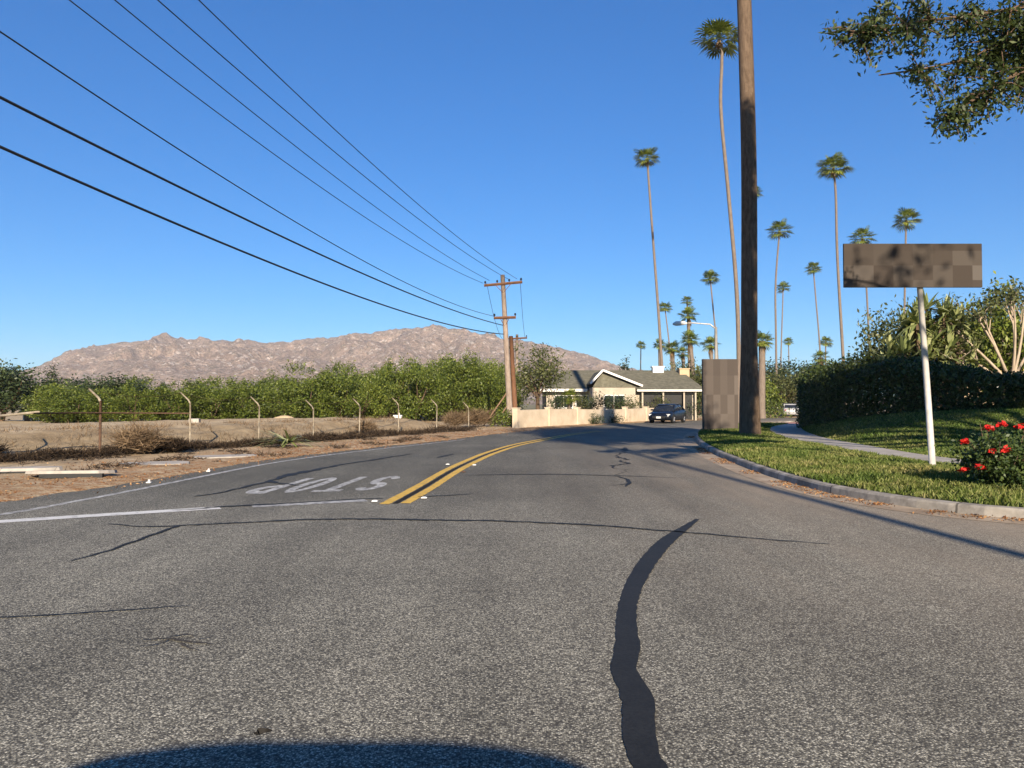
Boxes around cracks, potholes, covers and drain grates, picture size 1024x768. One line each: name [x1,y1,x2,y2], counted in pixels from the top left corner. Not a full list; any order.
crack [143,634,210,650]
crack [73,454,829,560]
crack [491,447,674,487]
crack [1,605,190,617]
